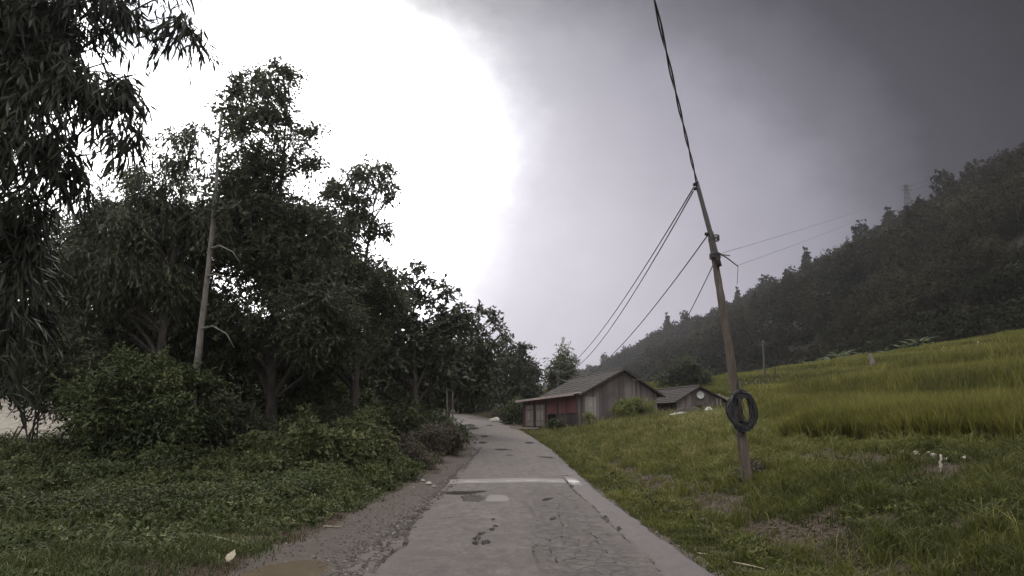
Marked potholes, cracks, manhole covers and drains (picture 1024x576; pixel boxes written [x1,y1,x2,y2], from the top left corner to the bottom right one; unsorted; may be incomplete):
pothole [461,494,485,502]
crack [530,475,630,569]
